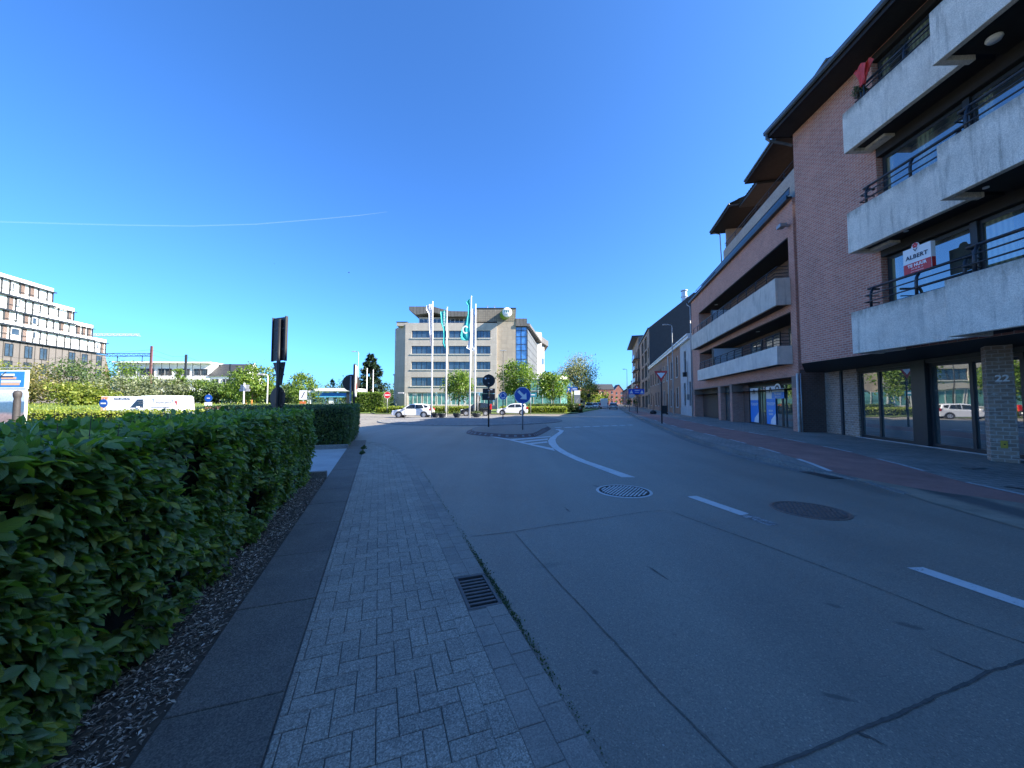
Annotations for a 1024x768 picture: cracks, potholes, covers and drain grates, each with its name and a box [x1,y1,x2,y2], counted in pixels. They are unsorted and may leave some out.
manhole cover [769,501,854,521]
manhole cover [596,485,653,498]
drain grate [455,573,503,610]
